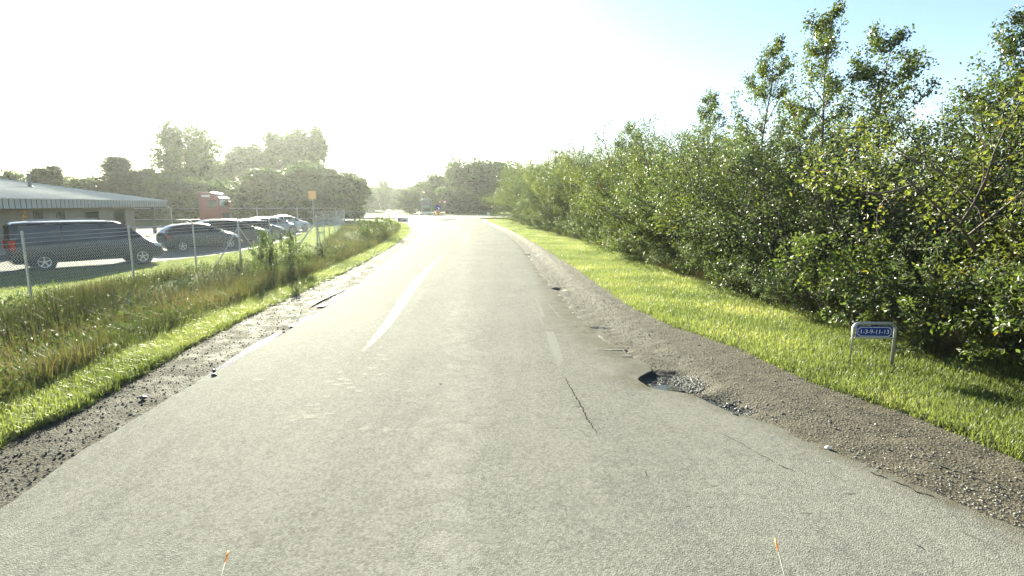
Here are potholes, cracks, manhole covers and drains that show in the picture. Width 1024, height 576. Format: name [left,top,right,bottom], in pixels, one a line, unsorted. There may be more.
pothole [701,398,756,416]
crack [565,378,597,435]
pothole [639,372,705,394]
